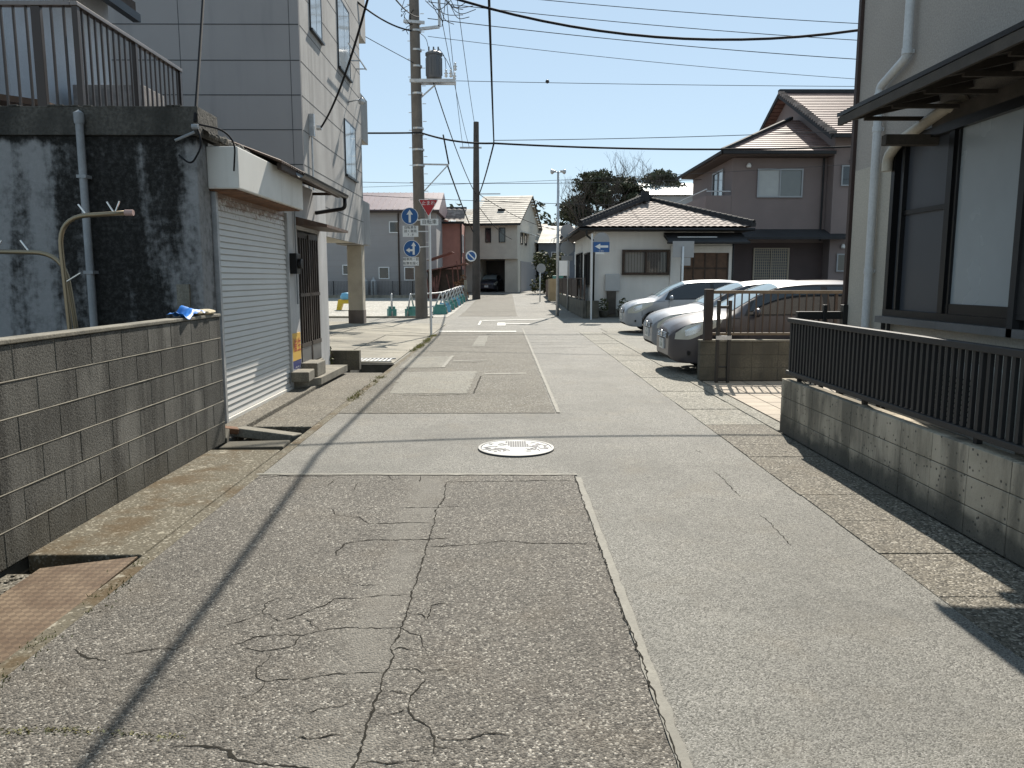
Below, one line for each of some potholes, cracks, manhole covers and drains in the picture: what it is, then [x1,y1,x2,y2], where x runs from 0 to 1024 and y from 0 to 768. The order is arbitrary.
crack [174,476,682,768]
crack [75,644,187,661]
manhole cover [478,439,554,457]
